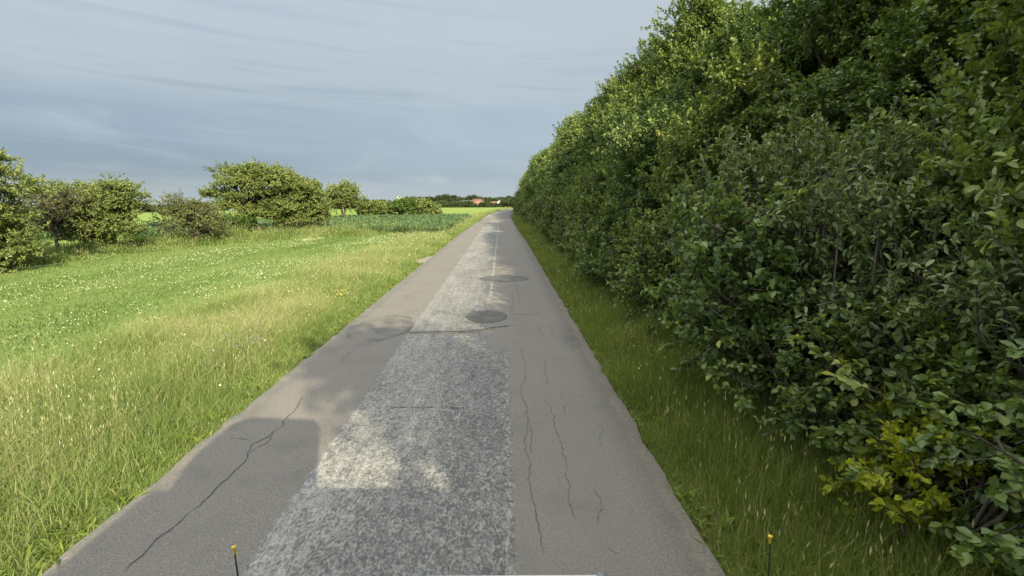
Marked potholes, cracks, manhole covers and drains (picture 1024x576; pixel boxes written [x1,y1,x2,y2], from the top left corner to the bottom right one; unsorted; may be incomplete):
crack [514,346,543,549]
crack [127,397,303,568]
crack [544,361,575,516]
crack [404,269,565,337]
